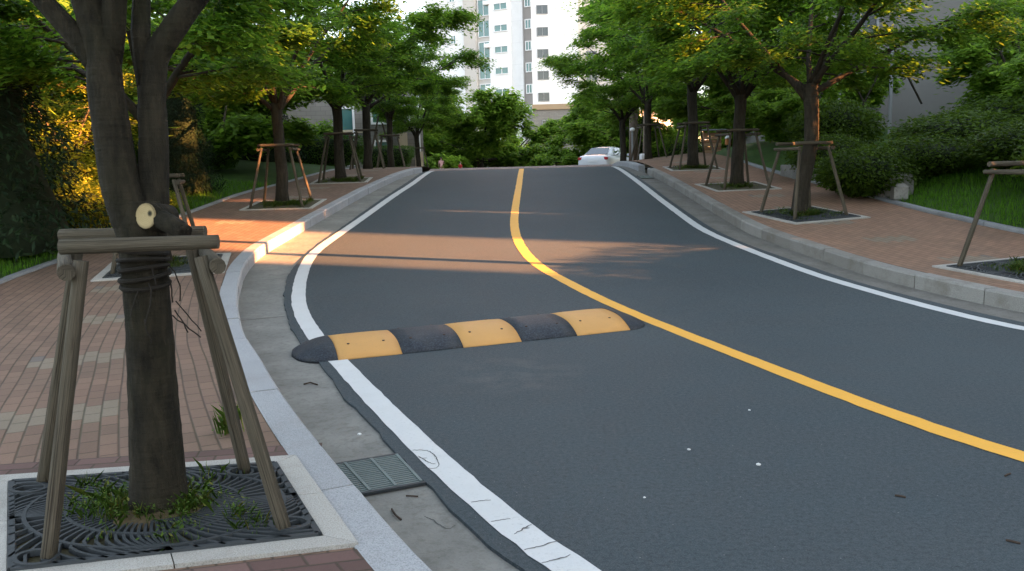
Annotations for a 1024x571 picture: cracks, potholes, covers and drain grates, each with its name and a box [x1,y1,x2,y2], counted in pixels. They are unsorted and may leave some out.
drain grate [336,453,426,496]
crack [495,518,567,563]
